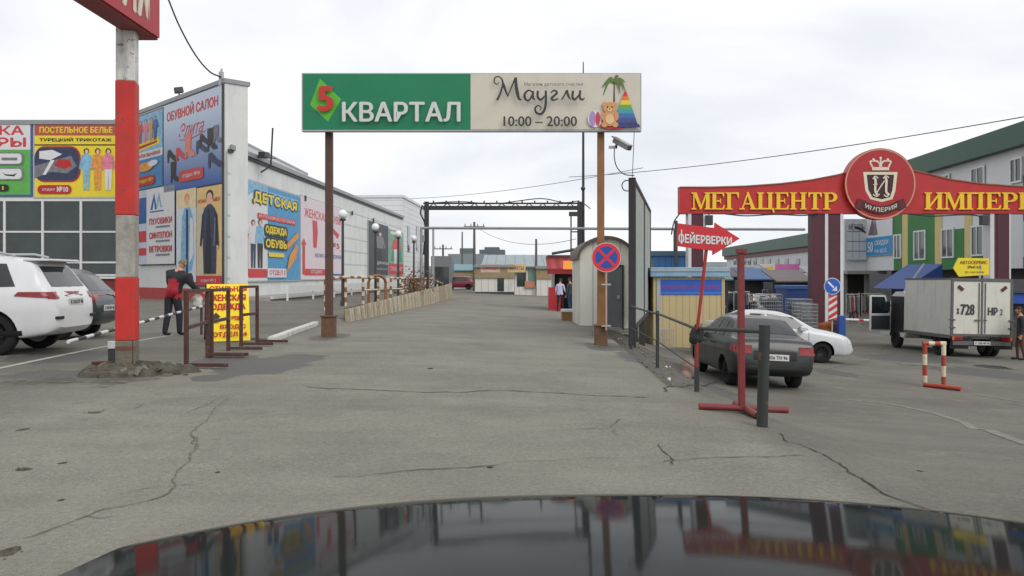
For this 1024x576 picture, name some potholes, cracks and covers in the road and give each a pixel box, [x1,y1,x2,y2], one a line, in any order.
crack [336,465,491,477]
crack [306,386,636,397]
crack [658,433,931,510]
crack [24,397,228,538]
